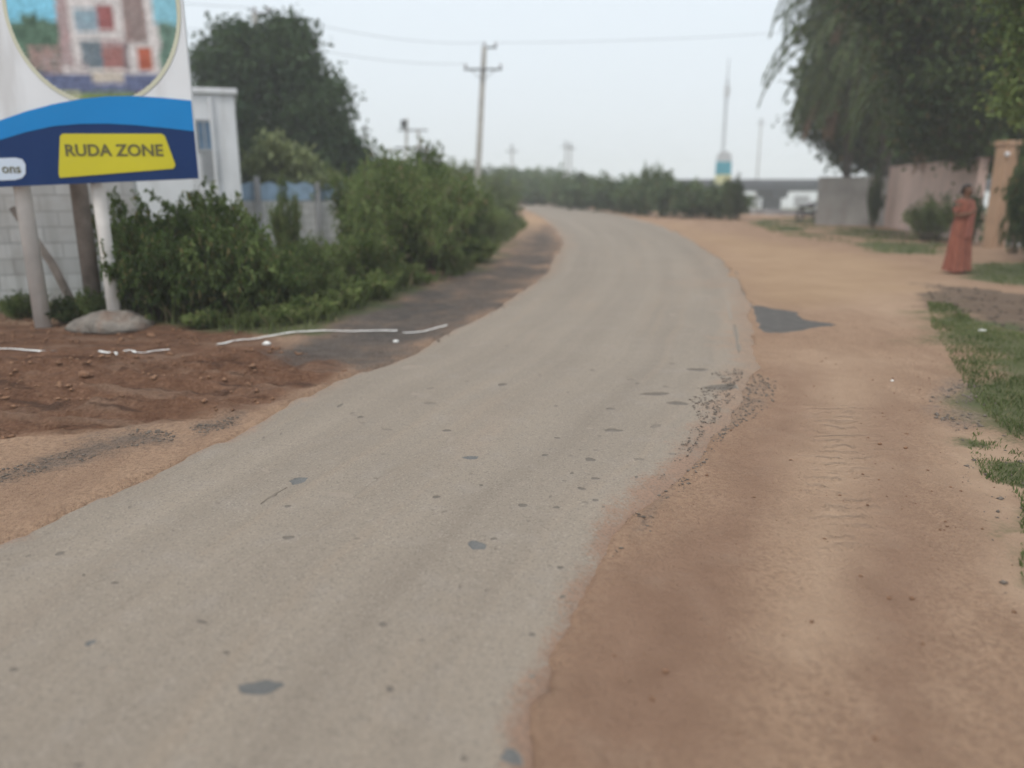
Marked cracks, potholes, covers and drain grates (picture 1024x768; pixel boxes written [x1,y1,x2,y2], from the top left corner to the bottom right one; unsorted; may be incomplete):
crack [261,487,288,504]
